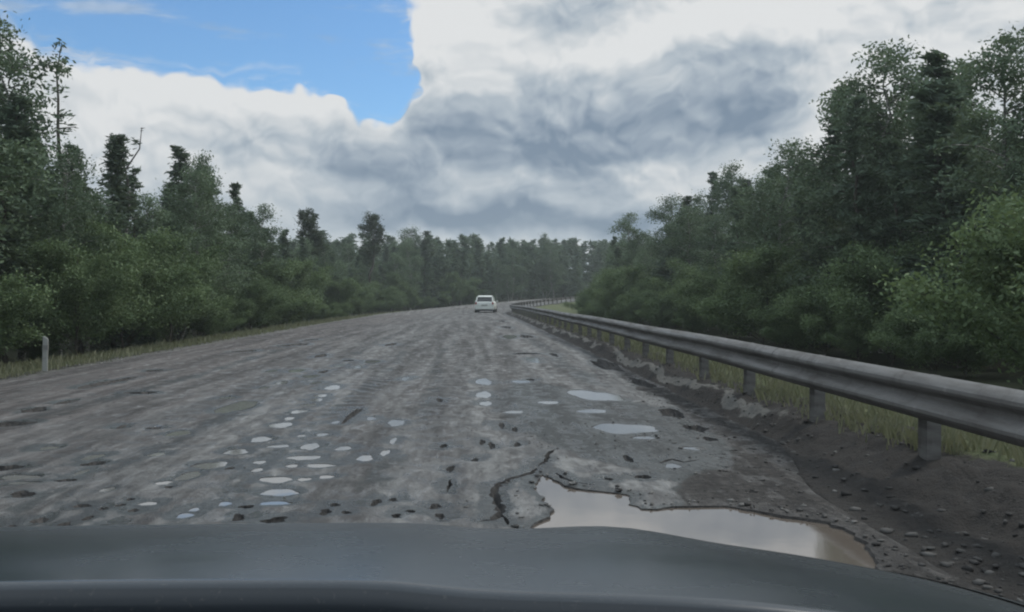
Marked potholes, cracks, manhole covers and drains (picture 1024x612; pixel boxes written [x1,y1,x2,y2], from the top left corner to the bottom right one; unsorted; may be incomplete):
pothole [591,423,658,434]
pothole [628,377,657,388]
pothole [658,408,685,419]
crack [482,449,594,525]
pothole [530,474,880,570]
pothole [567,390,625,401]
